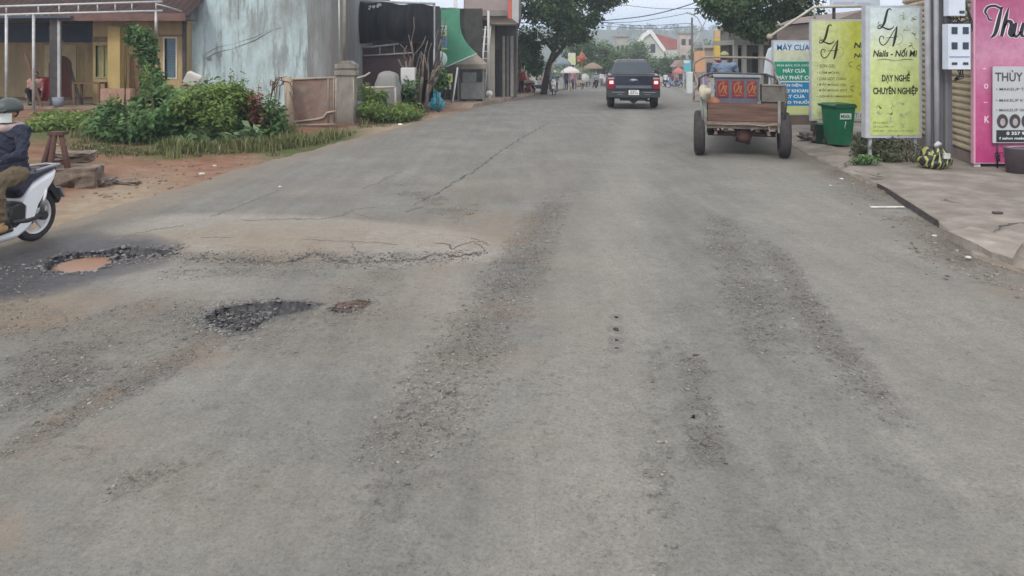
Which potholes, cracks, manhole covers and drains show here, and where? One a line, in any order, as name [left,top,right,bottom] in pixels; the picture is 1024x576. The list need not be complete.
crack [108,189,374,242]
crack [407,124,547,212]
pothole [194,297,327,337]
crack [187,238,489,264]
pothole [27,245,184,275]
pothole [607,336,625,345]
pothole [607,325,625,333]
pothole [320,297,380,316]
pothole [607,345,625,353]
